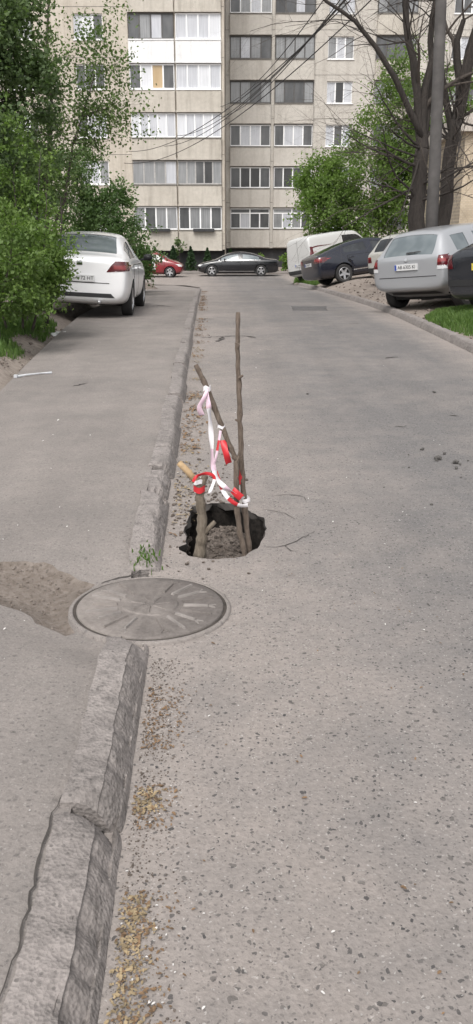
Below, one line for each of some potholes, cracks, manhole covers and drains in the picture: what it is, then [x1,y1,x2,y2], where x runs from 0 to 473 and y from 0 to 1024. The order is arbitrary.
manhole cover [68,577,231,647]
pothole [179,503,267,559]
